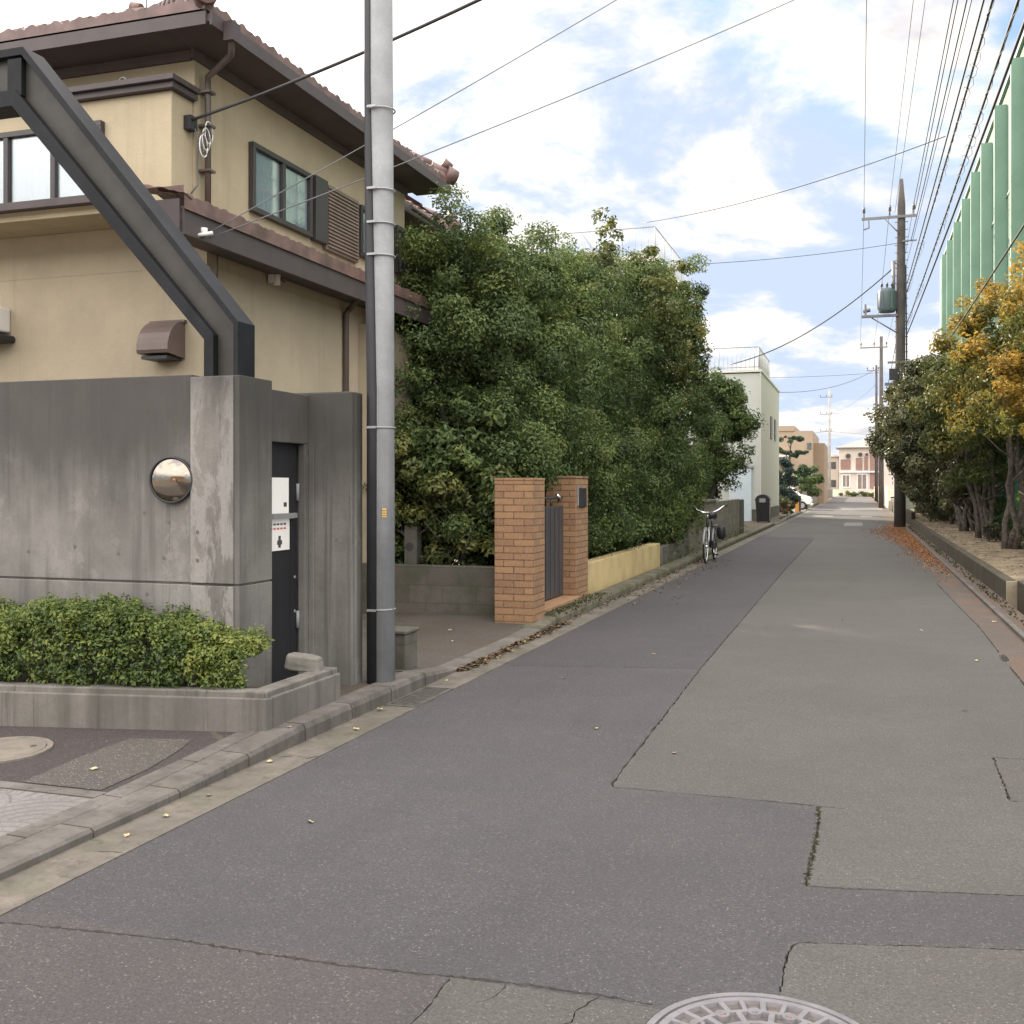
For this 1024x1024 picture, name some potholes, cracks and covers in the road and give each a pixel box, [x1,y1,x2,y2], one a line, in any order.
manhole cover [646,992,860,1024]
crack [411,979,450,1024]
crack [779,942,1022,992]
crack [992,758,1016,802]
crack [803,807,821,886]
drain grate [385,686,453,708]
manhole cover [0,736,53,764]
